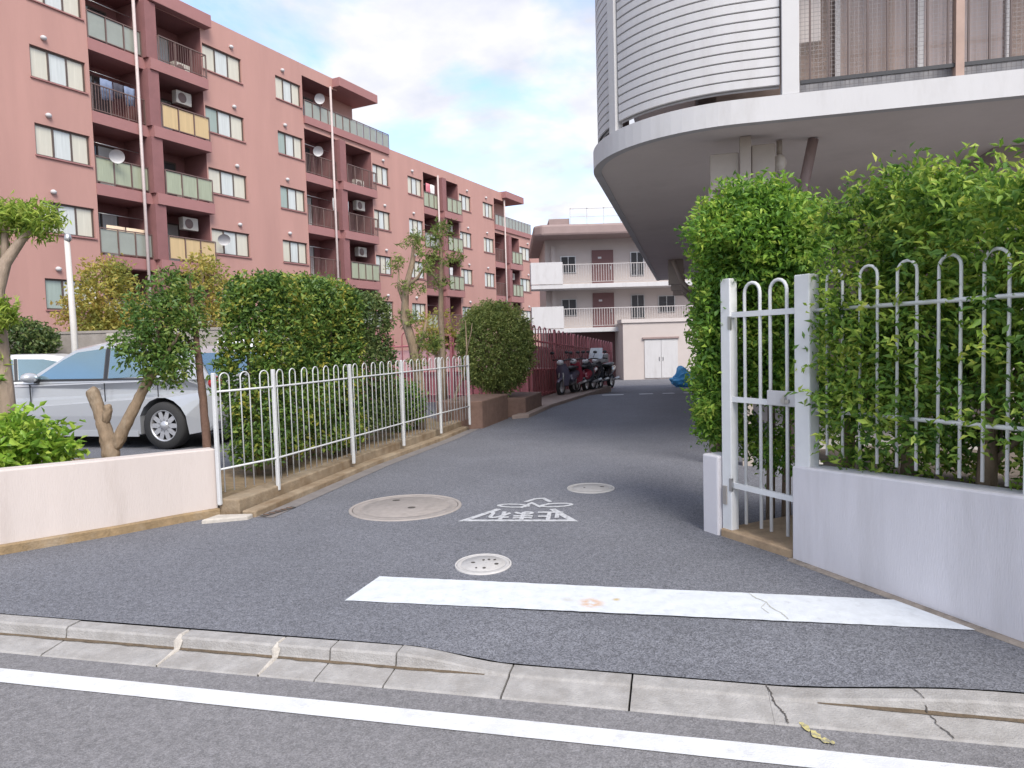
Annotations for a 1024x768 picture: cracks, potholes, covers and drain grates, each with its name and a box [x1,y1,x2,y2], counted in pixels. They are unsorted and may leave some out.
manhole cover [567,483,615,494]
crack [765,684,789,723]
crack [912,687,954,738]
manhole cover [455,554,512,575]
manhole cover [349,494,461,521]
